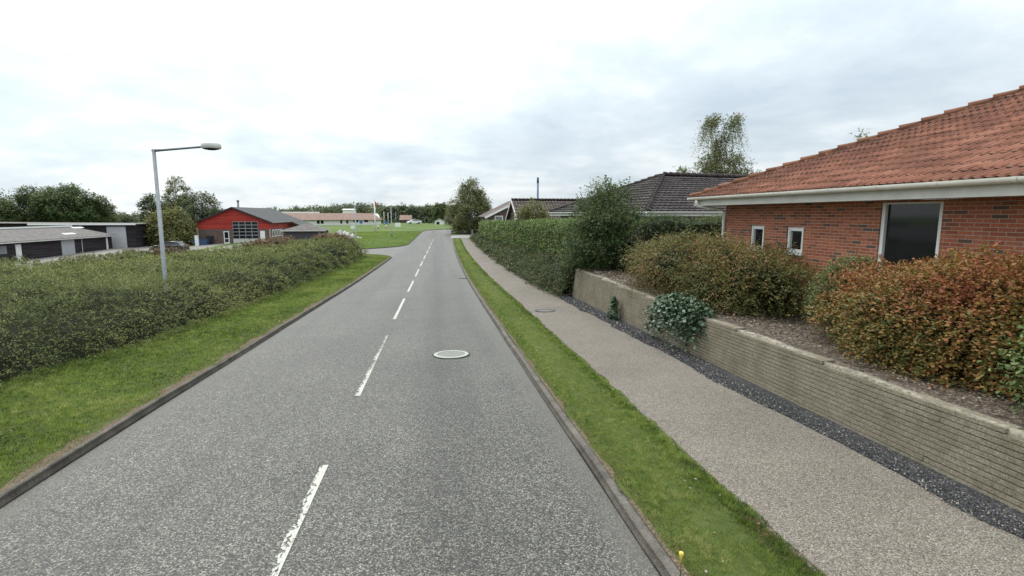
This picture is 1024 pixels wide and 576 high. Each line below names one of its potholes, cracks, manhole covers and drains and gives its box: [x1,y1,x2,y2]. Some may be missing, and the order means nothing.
manhole cover [433,350,470,359]
